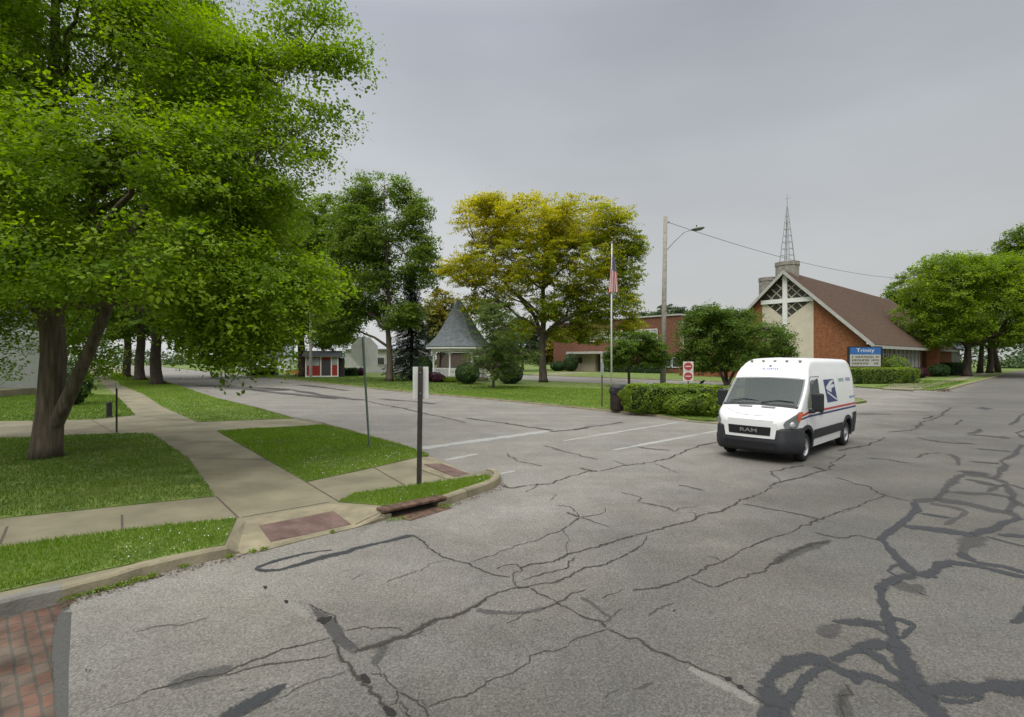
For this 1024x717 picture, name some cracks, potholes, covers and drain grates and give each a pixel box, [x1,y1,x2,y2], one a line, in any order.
drain grate [376,494,450,521]
crack [104,408,1008,717]
